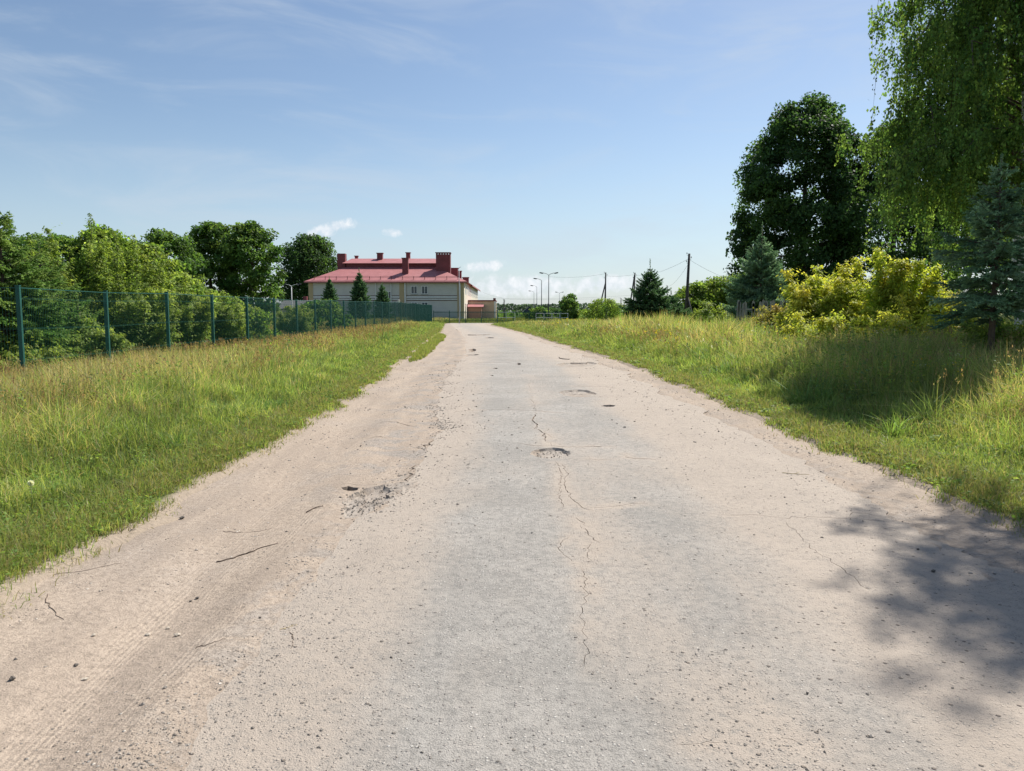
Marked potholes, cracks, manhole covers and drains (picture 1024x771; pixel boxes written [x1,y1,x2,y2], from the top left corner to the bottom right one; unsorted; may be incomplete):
pothole [530,448,571,459]
crack [557,464,626,671]
crack [718,512,881,589]
pothole [558,389,597,397]
pothole [340,484,394,520]
